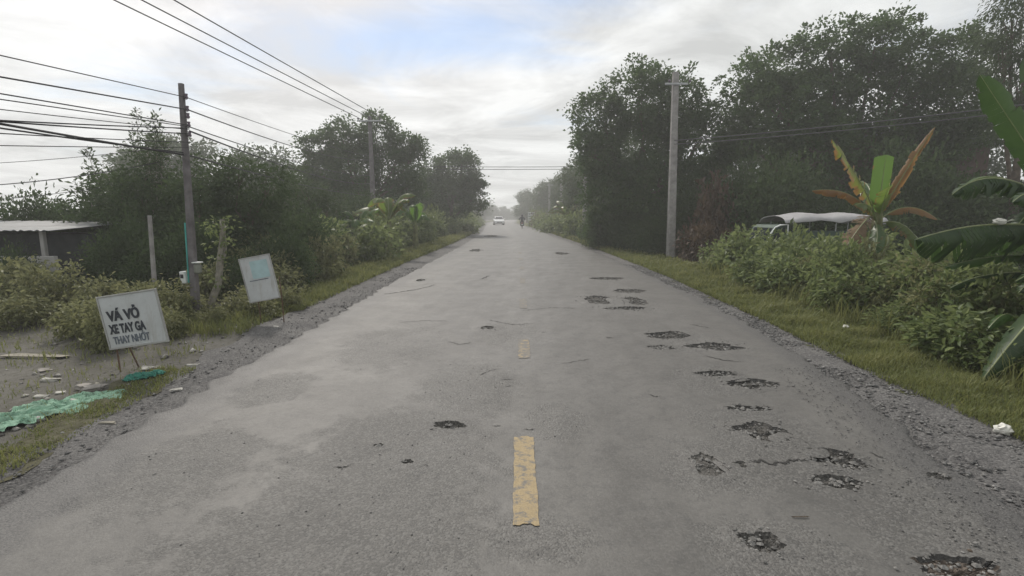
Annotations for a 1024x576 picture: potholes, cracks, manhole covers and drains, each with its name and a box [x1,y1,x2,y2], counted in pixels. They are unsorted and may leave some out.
pothole [669,340,757,354]
pothole [422,417,477,434]
pothole [716,402,785,416]
pothole [633,329,701,341]
pothole [718,417,807,449]
pothole [575,294,630,306]
pothole [718,523,806,566]
pothole [890,543,1021,576]
pothole [683,368,750,382]
pothole [791,441,883,478]
pothole [794,468,881,499]
